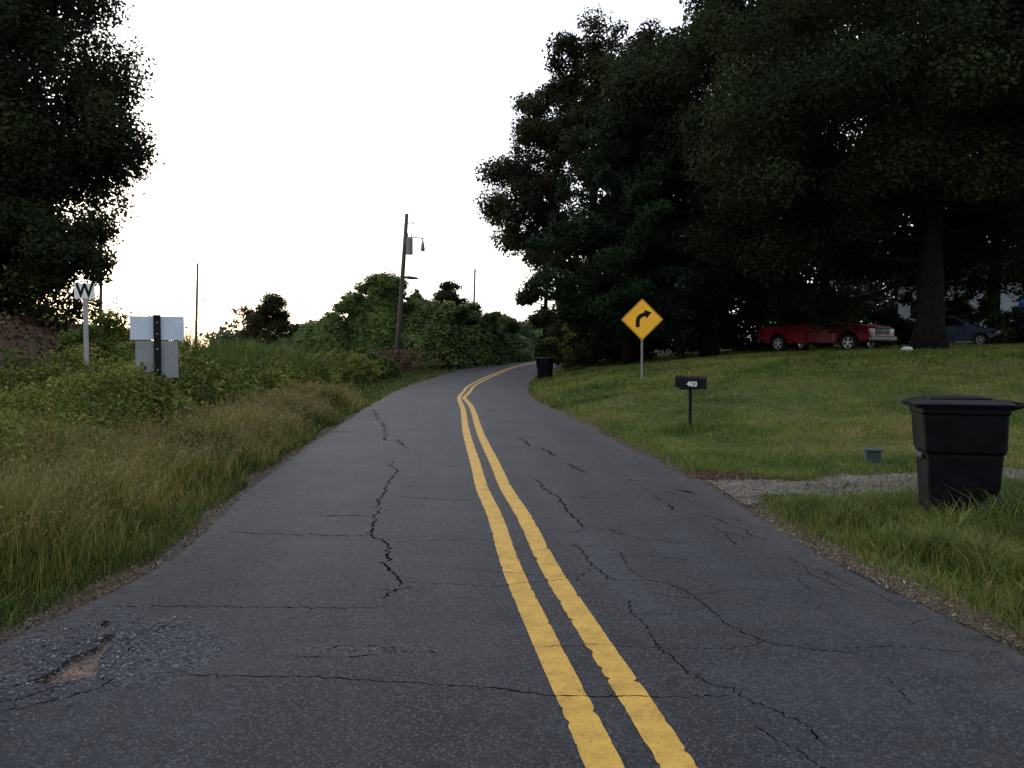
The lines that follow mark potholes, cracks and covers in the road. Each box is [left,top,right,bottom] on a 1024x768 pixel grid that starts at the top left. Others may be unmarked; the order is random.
crack [4,479,996,768]
pothole [34,634,115,684]
crack [228,409,556,600]
